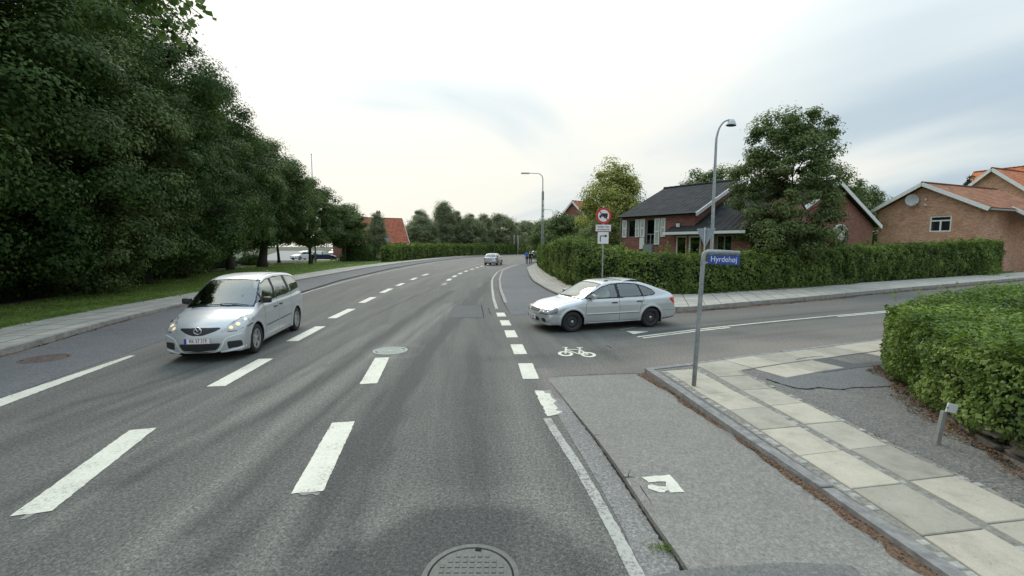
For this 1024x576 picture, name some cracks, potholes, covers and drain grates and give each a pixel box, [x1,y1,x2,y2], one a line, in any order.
manhole cover [16,354,72,364]
manhole cover [421,544,520,576]
manhole cover [373,347,408,355]
